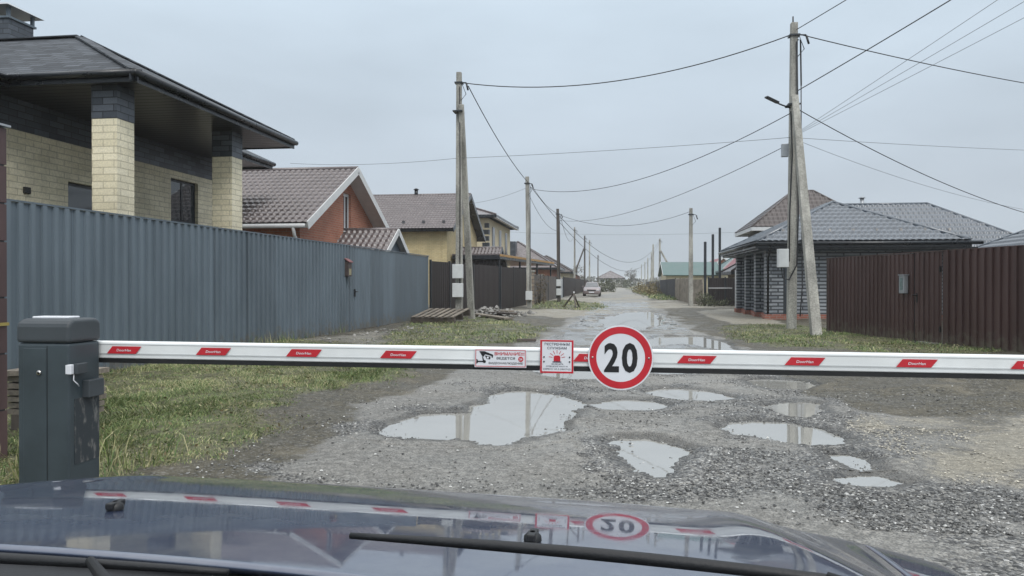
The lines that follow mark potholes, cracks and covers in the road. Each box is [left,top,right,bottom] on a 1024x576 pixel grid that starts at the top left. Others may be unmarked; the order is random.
pothole [572,310,687,332]
pothole [587,393,698,415]
pothole [346,385,603,451]
pothole [627,383,761,403]
pothole [687,412,890,448]
pothole [571,427,728,487]
